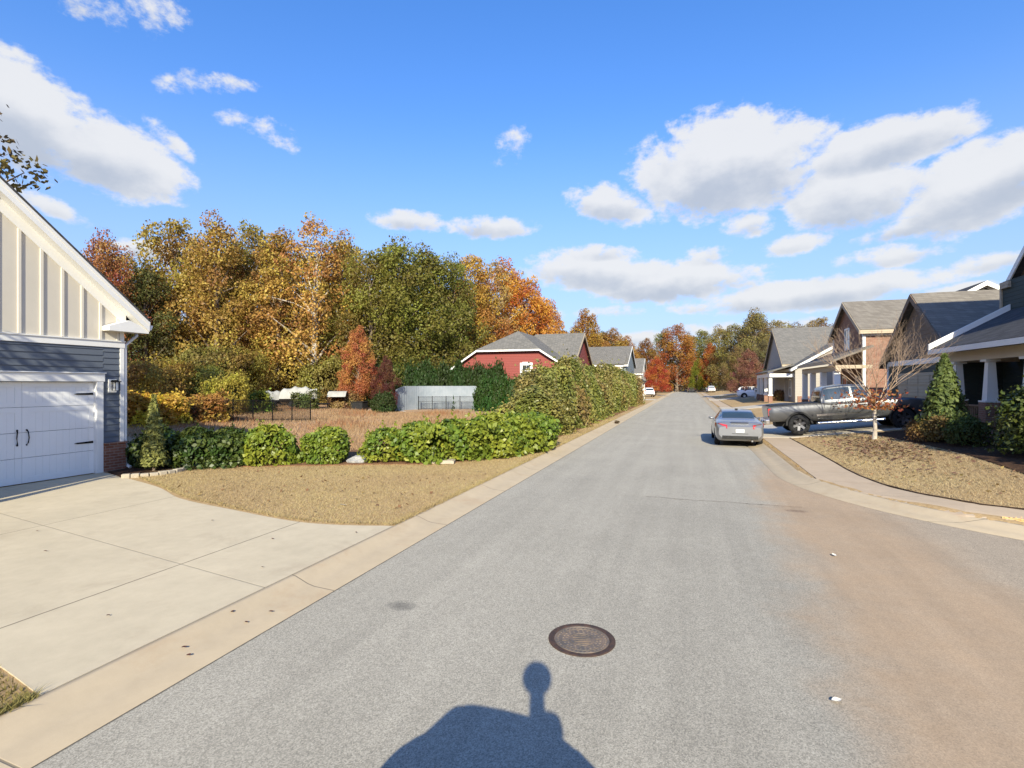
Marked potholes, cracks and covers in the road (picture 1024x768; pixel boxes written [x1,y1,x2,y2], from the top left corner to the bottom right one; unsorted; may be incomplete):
manhole cover [548,623,616,657]
